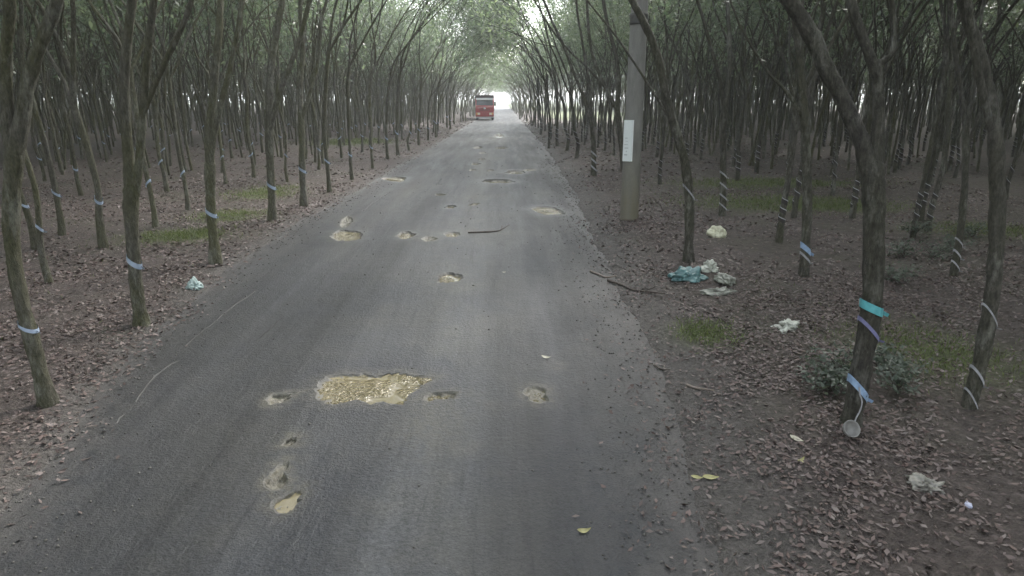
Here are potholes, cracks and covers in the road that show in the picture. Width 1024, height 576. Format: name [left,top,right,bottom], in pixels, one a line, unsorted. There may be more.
pothole [313,372,436,405]
pothole [263,460,290,491]
pothole [340,216,353,228]
pothole [423,391,459,402]
pothole [280,435,297,446]
pothole [437,272,463,283]
pothole [395,231,416,239]
pothole [522,385,550,404]
pothole [329,230,363,241]
pothole [265,392,295,405]
pothole [270,486,306,514]
pothole [531,206,565,215]
